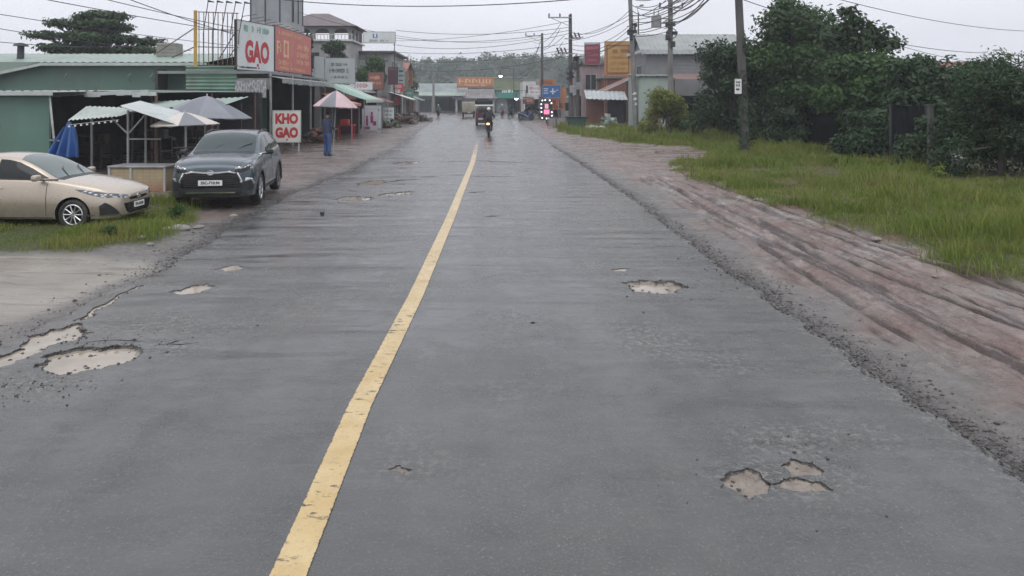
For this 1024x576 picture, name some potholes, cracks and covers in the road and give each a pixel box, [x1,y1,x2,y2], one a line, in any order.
pothole [720,468,771,499]
pothole [169,283,215,294]
pothole [35,345,143,375]
pothole [0,323,92,367]
pothole [622,280,689,294]
pothole [781,459,824,476]
pothole [765,477,833,492]
